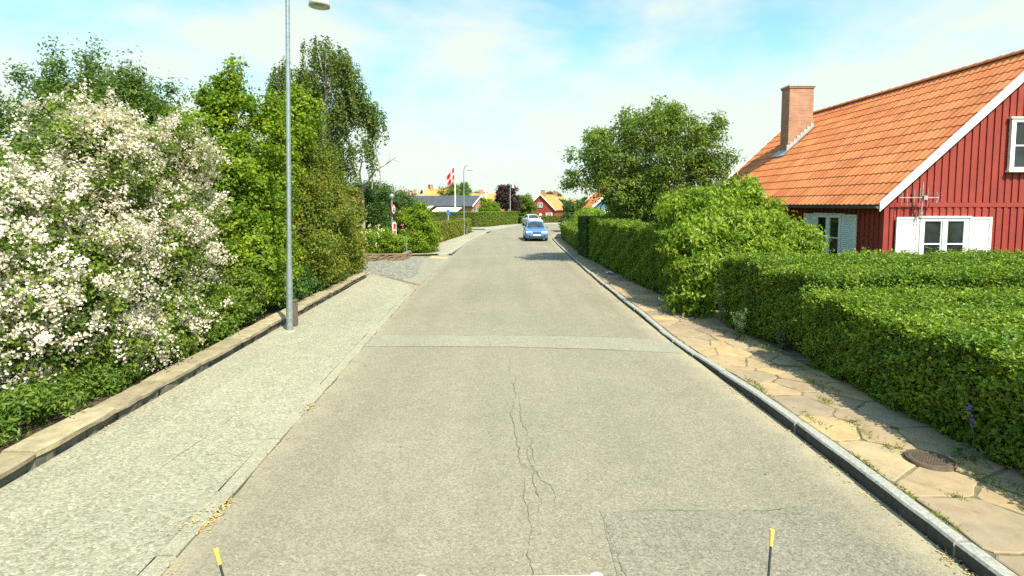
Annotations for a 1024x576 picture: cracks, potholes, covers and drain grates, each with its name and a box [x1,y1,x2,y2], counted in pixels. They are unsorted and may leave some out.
manhole cover [904,449,957,472]
crack [509,368,555,576]
